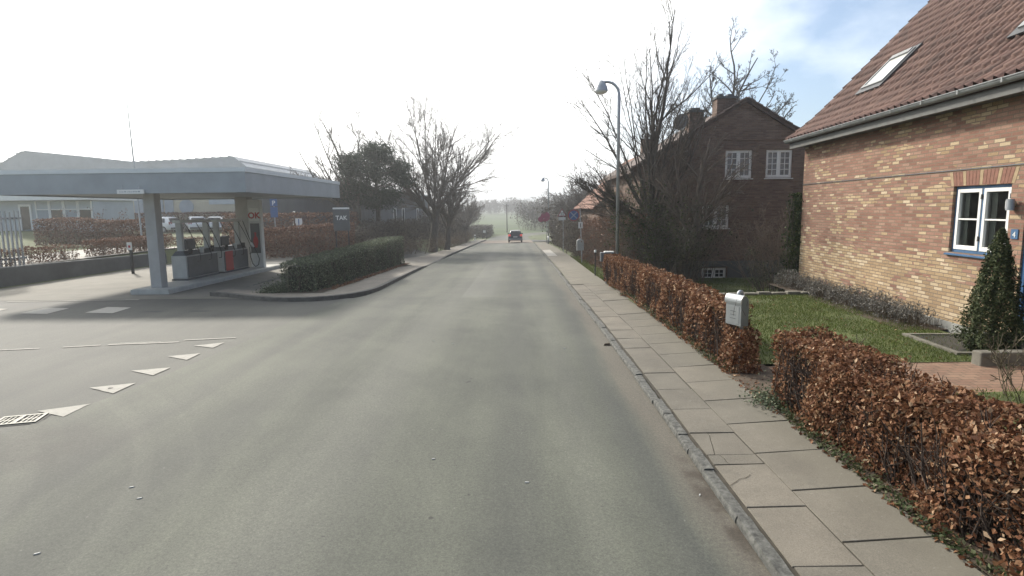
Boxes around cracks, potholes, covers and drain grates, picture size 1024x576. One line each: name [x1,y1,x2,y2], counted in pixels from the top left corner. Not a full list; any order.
drain grate [0,413,51,427]
